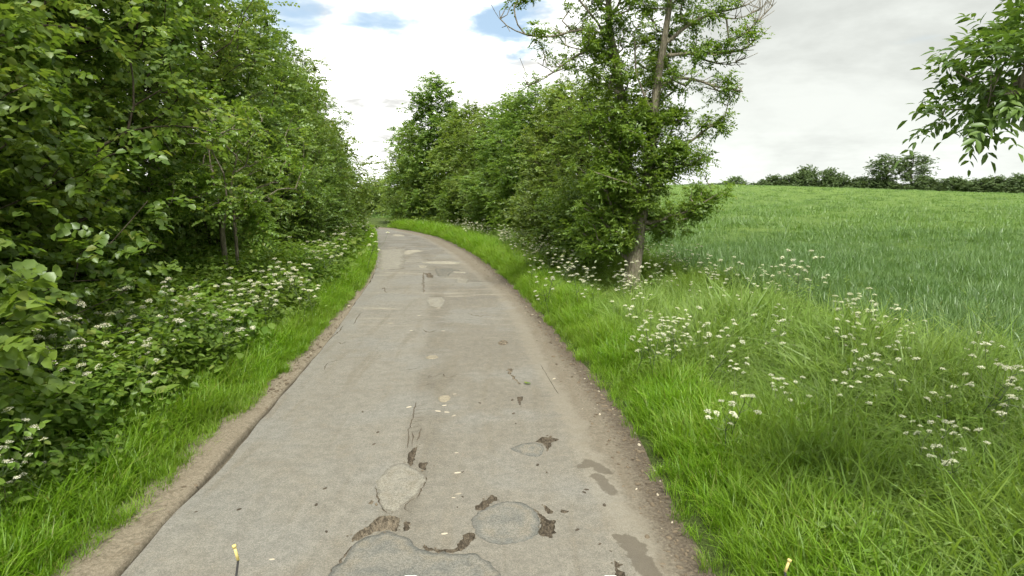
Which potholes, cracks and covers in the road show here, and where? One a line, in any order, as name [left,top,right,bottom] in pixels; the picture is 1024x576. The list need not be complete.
crack [407,403,425,448]
pothole [407,446,418,466]
pothole [423,532,475,553]
pothole [475,495,497,510]
pothole [352,515,400,541]
pothole [535,437,559,451]
pothole [534,509,556,538]
